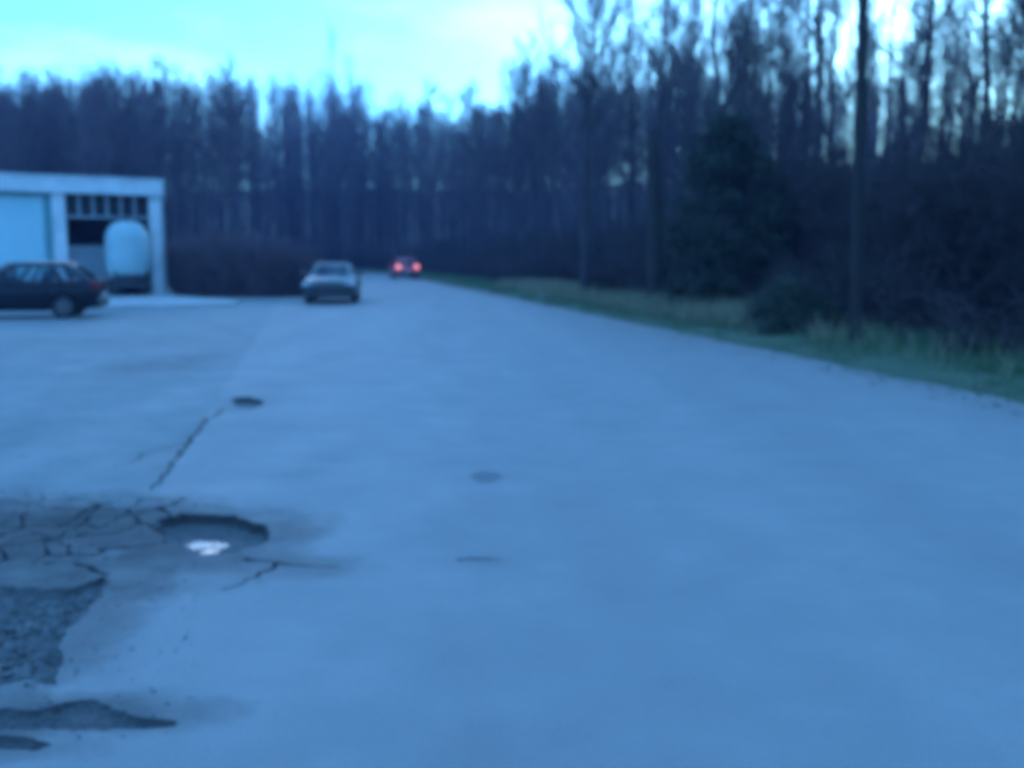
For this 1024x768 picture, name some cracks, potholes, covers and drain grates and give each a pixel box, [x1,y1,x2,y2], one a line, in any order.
crack [0,497,185,575]
pothole [152,513,270,554]
pothole [470,471,504,484]
pothole [231,397,264,408]
crack [222,558,334,590]
pothole [0,699,178,731]
pothole [0,735,52,751]
